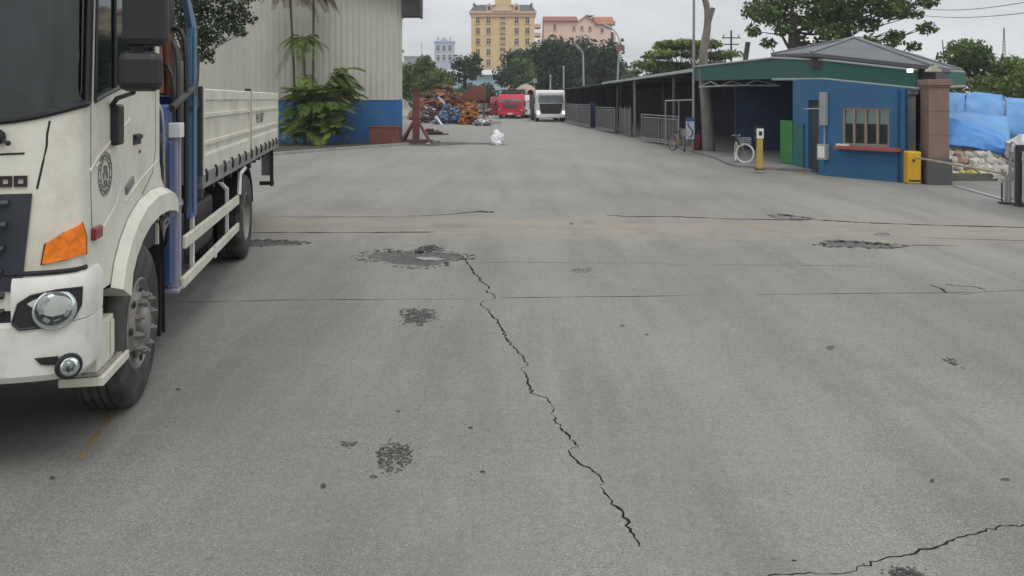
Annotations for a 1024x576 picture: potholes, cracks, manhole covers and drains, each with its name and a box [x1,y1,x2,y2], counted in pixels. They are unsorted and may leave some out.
pothole [811,239,911,249]
pothole [250,239,312,247]
pothole [366,431,420,480]
crack [205,255,1024,547]
crack [768,524,1024,576]
pothole [350,249,475,269]
pothole [394,305,453,333]
pothole [412,245,455,253]
